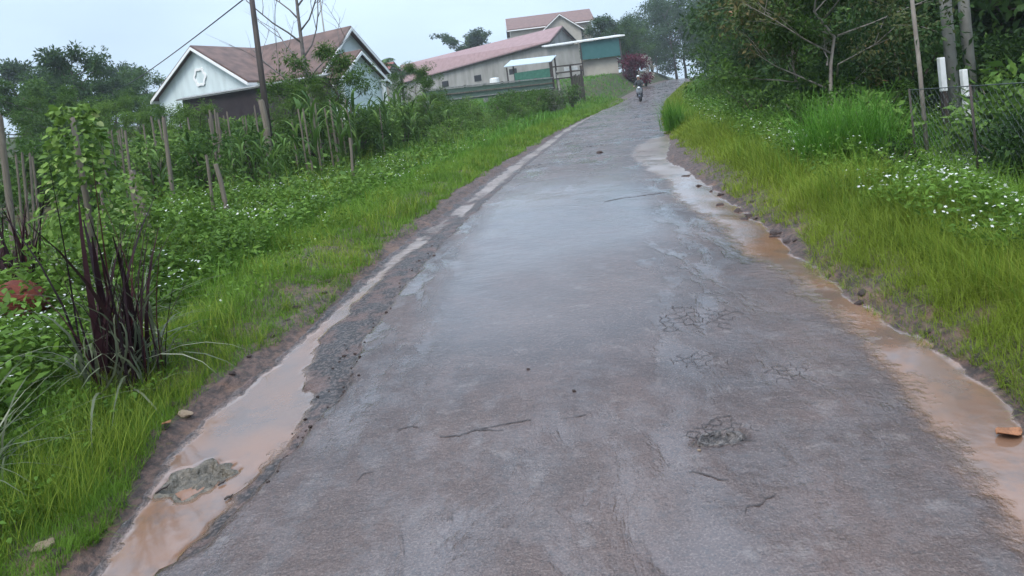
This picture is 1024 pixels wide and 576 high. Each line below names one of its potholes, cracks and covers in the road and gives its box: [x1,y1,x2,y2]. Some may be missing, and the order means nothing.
crack [439,419,531,437]
pothole [697,428,746,447]
pothole [153,458,239,503]
